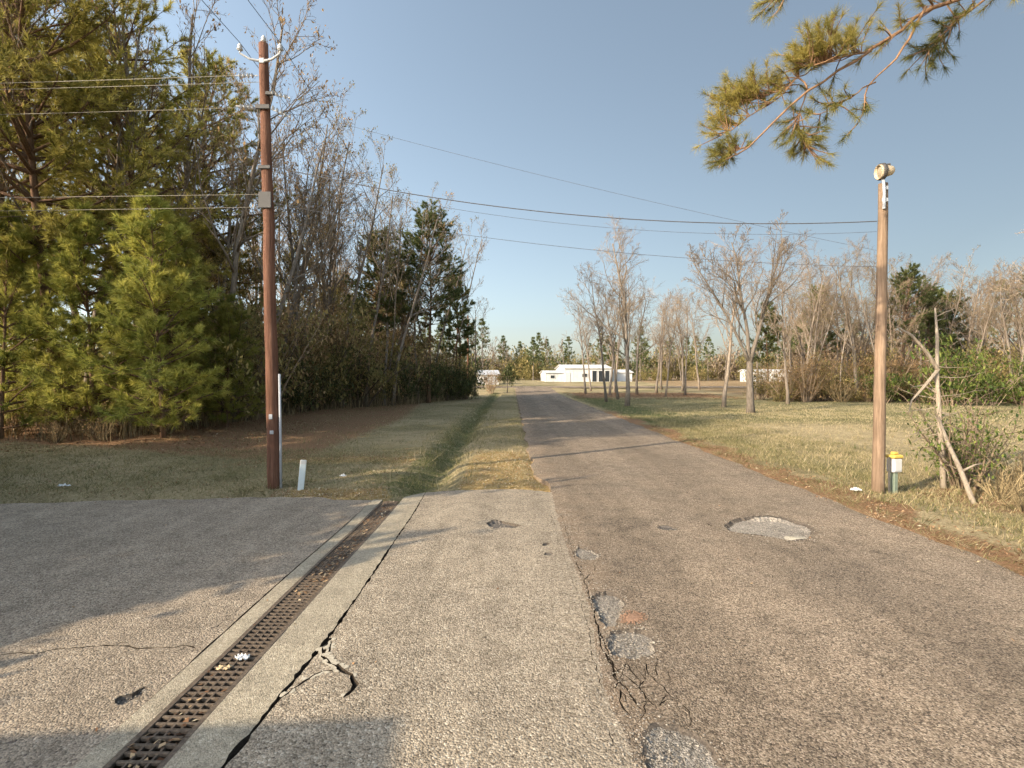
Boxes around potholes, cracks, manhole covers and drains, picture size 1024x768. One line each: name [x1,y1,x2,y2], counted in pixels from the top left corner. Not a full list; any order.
crack [1,544,359,697]
pothole [113,682,152,705]
pothole [486,519,522,529]
pothole [597,624,665,662]
pothole [585,586,632,635]
crack [551,511,728,765]
pothole [626,705,735,768]
